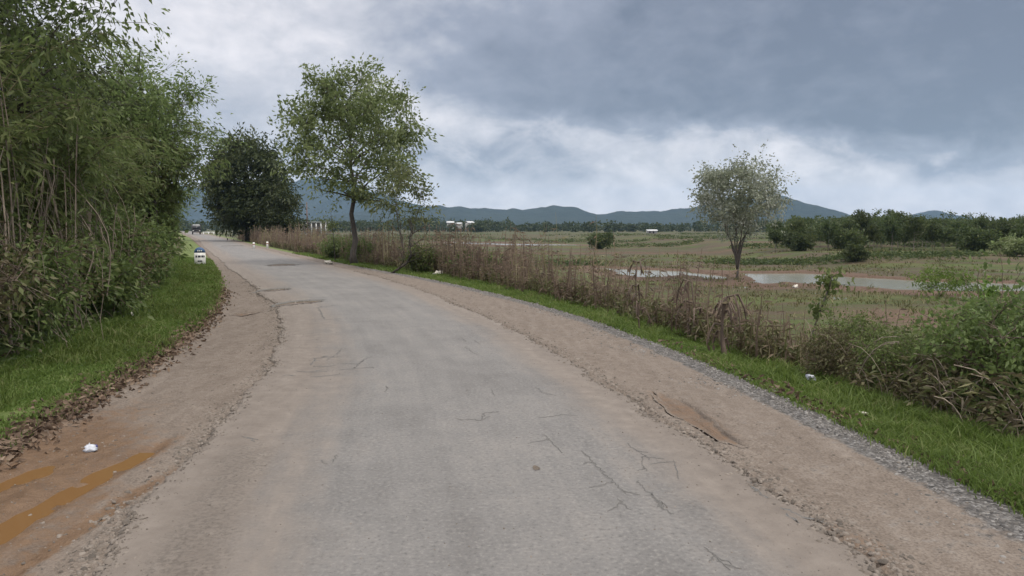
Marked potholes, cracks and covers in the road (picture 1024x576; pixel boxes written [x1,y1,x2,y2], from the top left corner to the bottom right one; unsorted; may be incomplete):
crack [290,348,374,377]
pothole [651,390,748,448]
crack [582,443,679,514]
crack [530,414,574,453]
